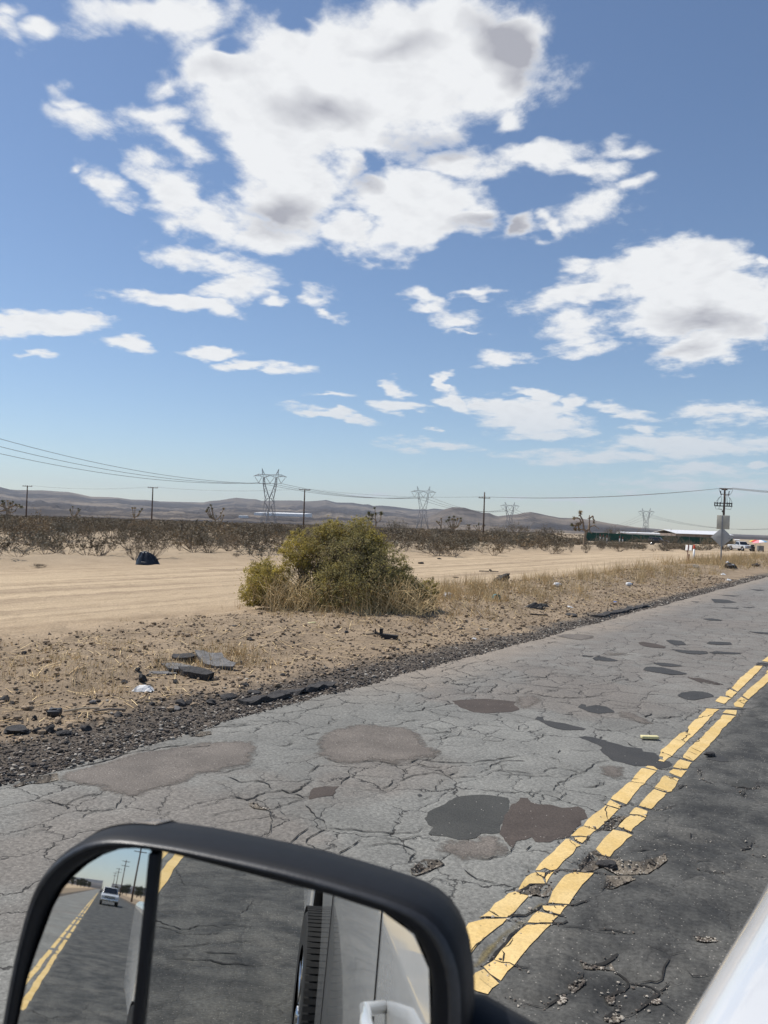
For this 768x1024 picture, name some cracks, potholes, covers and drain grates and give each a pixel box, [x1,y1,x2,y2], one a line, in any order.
pothole [606,876,635,890]
pothole [522,883,552,897]
pothole [578,850,667,875]
crack [2,647,715,1018]
pothole [410,859,443,875]
